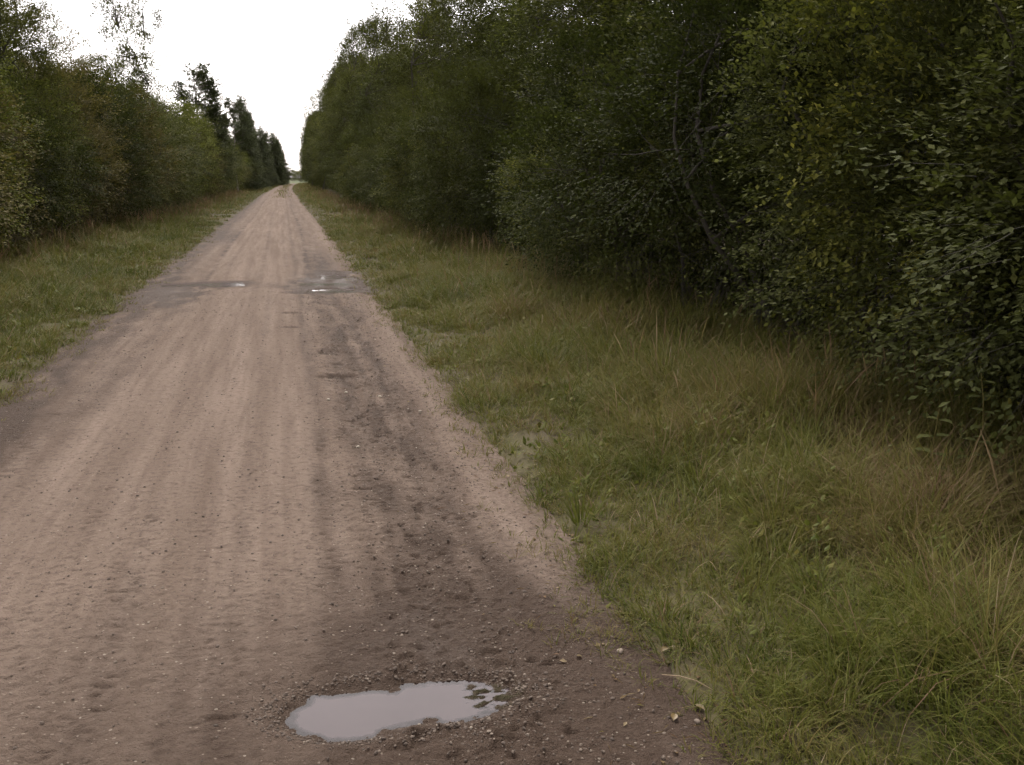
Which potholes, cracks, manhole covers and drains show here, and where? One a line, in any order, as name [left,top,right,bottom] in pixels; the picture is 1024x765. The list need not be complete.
pothole [264,666,529,746]
